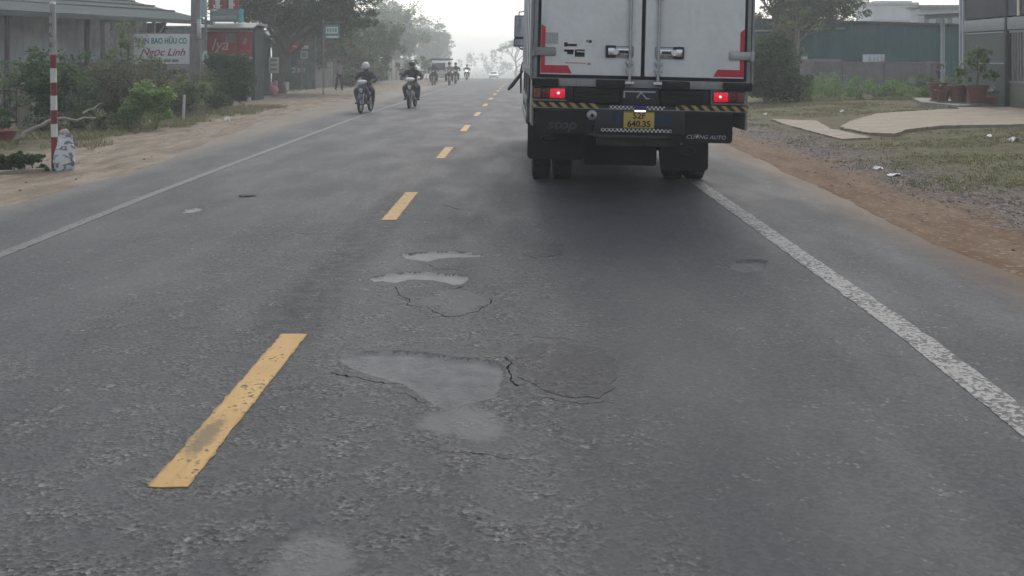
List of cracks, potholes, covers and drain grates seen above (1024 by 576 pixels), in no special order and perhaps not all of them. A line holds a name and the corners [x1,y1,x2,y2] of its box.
crack [333,373,425,403]
pothole [369,272,470,285]
pothole [399,251,484,262]
pothole [337,350,507,410]
